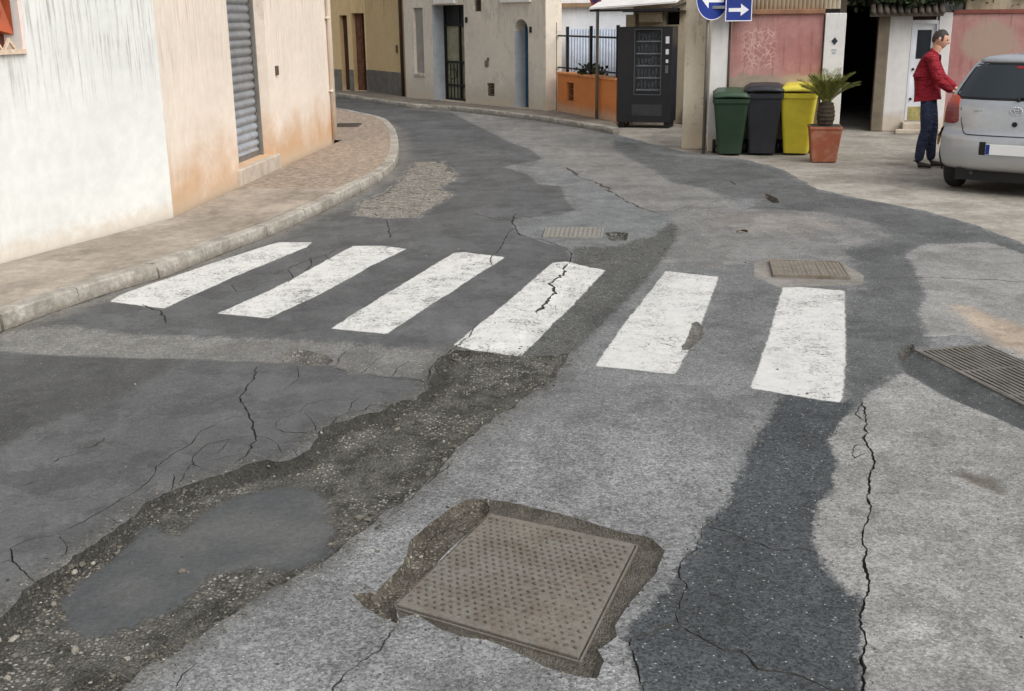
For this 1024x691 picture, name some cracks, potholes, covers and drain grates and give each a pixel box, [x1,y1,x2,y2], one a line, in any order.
drain grate [754,258,864,288]
crack [0,366,389,582]
drain grate [543,227,604,239]
pothole [605,231,628,241]
pothole [0,349,569,691]
crack [626,402,876,691]
manhole cover [391,499,665,678]
crack [328,214,573,382]
drain grate [914,344,1024,407]
pothole [681,321,704,351]
